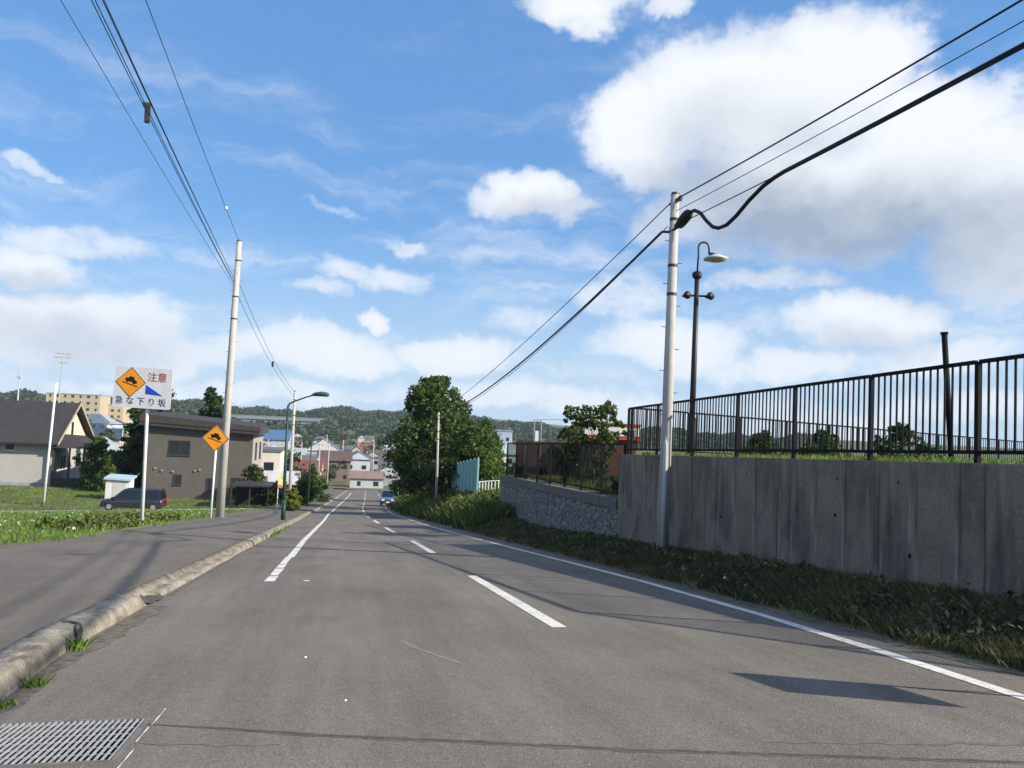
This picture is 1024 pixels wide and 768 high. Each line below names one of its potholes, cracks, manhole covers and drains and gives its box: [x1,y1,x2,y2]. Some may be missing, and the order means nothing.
drain grate [0,717,151,767]
